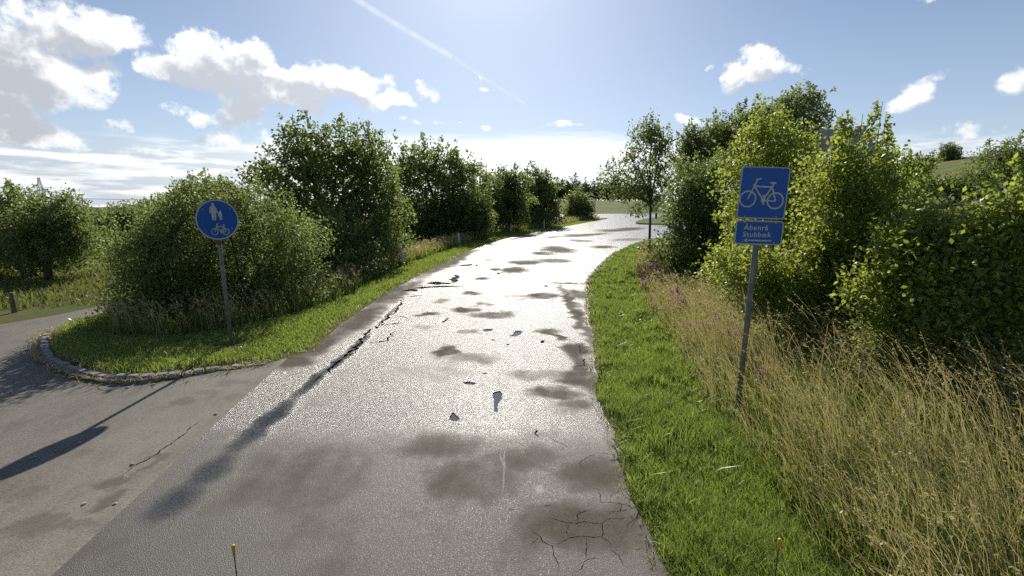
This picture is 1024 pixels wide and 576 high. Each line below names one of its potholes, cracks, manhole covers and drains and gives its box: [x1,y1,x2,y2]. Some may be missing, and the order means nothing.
crack [122,418,203,477]
pothole [493,391,503,412]
crack [314,295,423,382]
crack [527,492,632,571]
